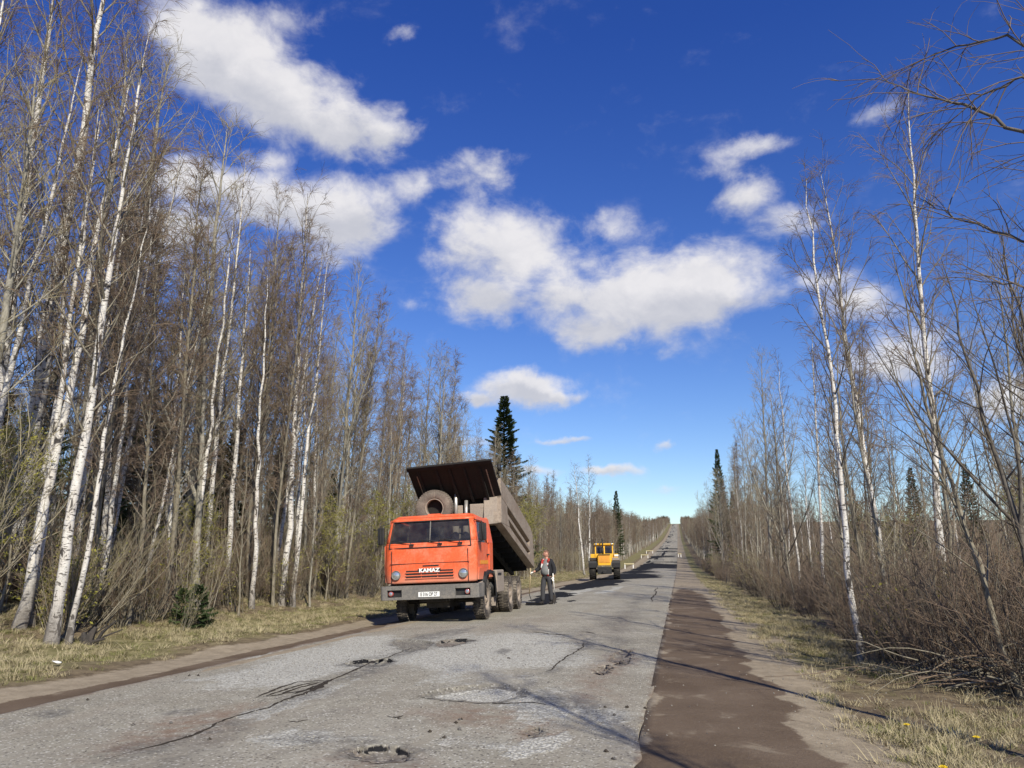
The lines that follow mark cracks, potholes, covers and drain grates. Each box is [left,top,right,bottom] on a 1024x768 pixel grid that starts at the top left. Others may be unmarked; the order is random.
pothole [592,665,615,675]
pothole [609,650,633,666]
crack [539,632,595,672]
pothole [342,658,398,667]
pothole [520,726,548,738]
pothole [431,639,475,647]
crack [101,647,413,761]
pothole [343,743,421,763]
